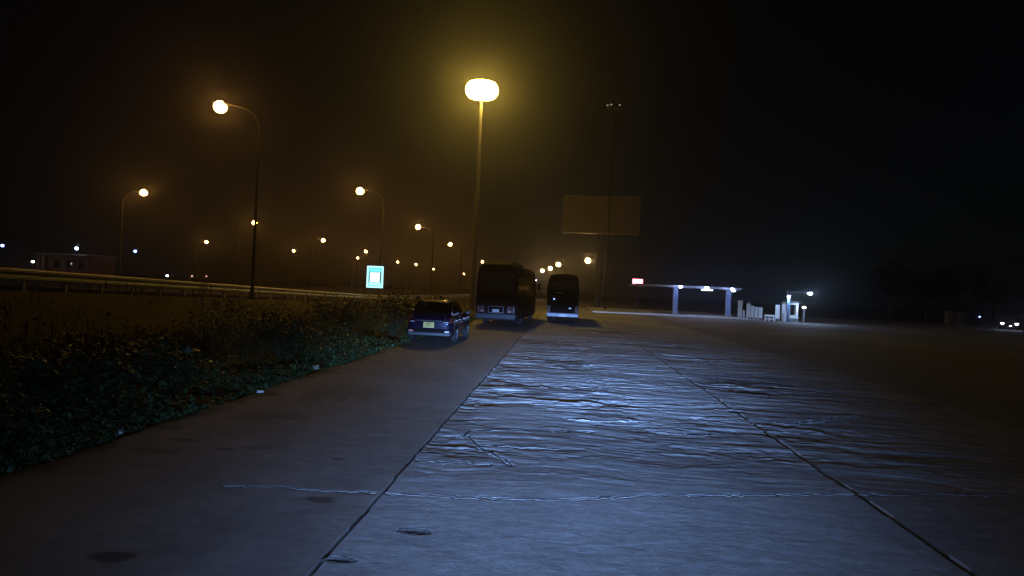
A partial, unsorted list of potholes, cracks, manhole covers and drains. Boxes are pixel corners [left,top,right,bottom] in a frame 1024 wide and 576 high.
pothole [319,556,357,564]
crack [417,415,858,467]
crack [224,485,1006,502]
